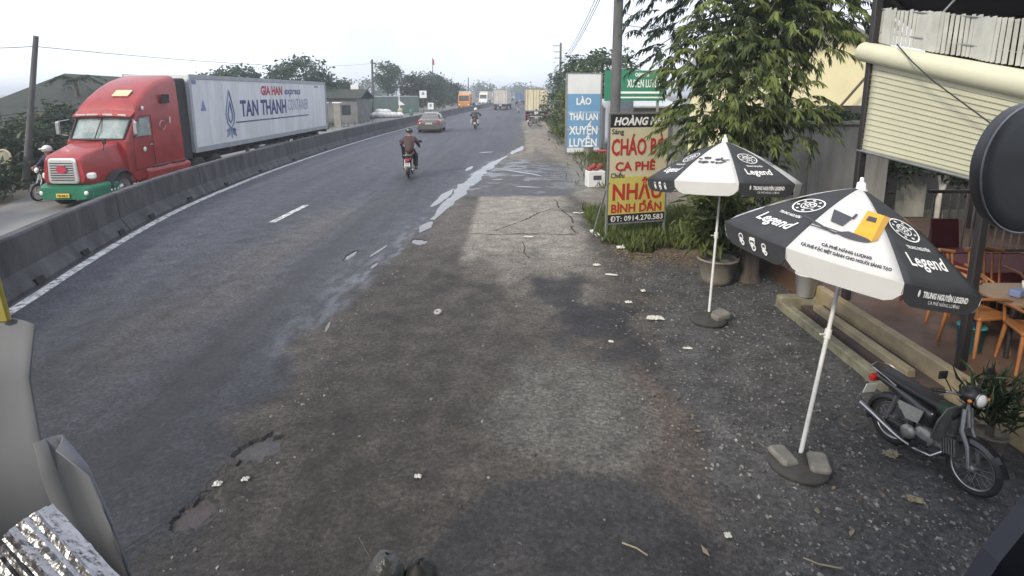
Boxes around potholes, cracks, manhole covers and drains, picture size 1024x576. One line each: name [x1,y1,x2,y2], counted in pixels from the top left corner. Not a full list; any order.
crack [466,198,587,270]
pothole [206,420,308,481]
pothole [137,479,247,555]
